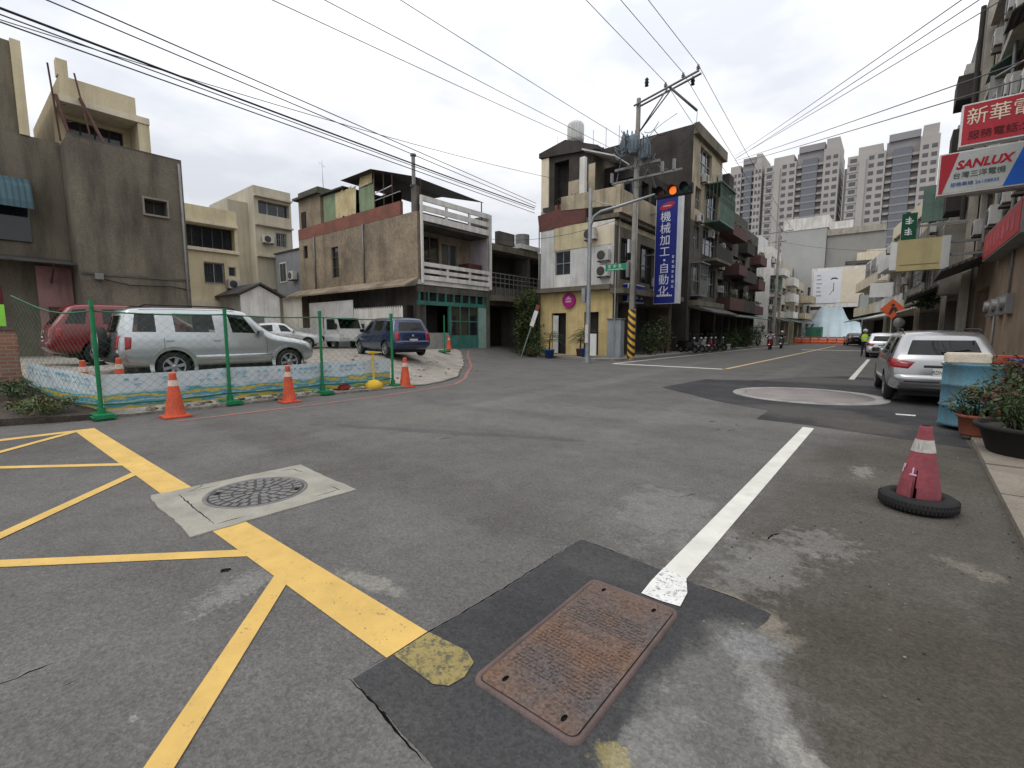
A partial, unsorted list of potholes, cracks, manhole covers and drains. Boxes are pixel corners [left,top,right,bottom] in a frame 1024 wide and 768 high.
manhole cover [475,580,678,746]
manhole cover [151,464,356,538]
manhole cover [733,387,891,405]
crack [0,663,79,689]
